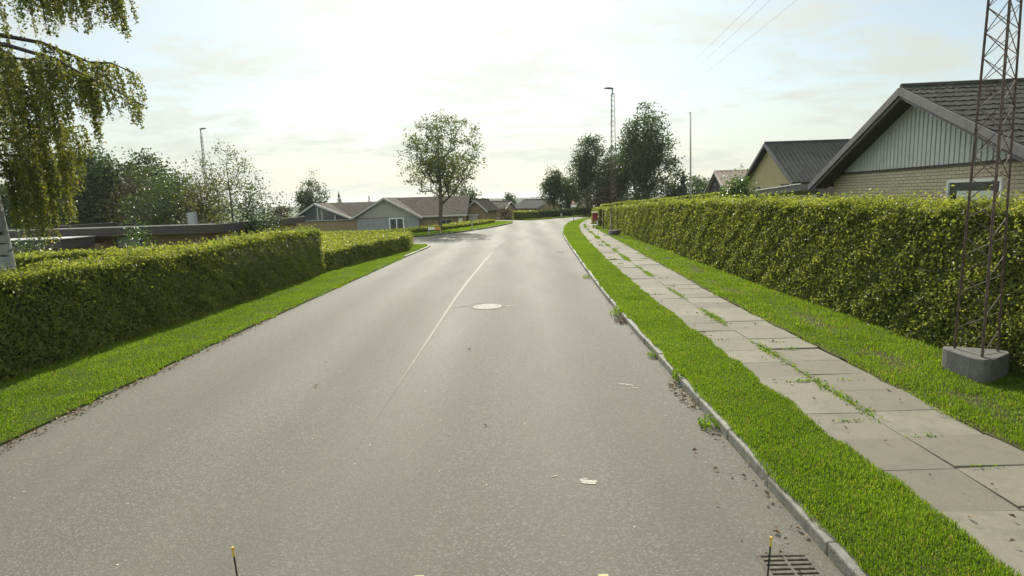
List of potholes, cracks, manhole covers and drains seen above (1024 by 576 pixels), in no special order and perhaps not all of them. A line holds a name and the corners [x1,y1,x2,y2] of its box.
drain grate [754,552,826,576]
